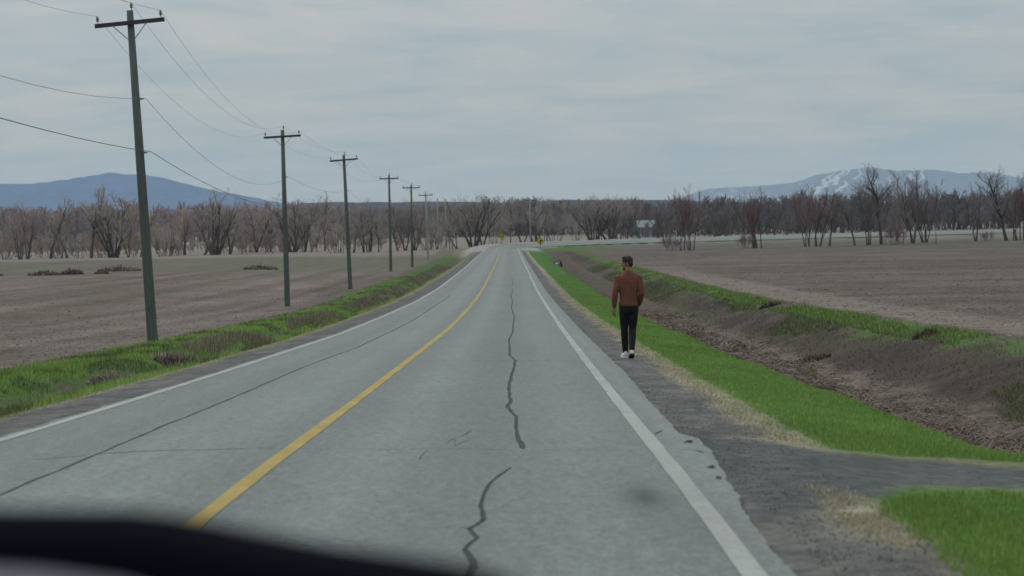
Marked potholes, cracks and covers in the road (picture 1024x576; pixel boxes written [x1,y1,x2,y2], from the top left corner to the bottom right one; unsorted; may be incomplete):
crack [0,280,526,496]
crack [461,467,512,568]
